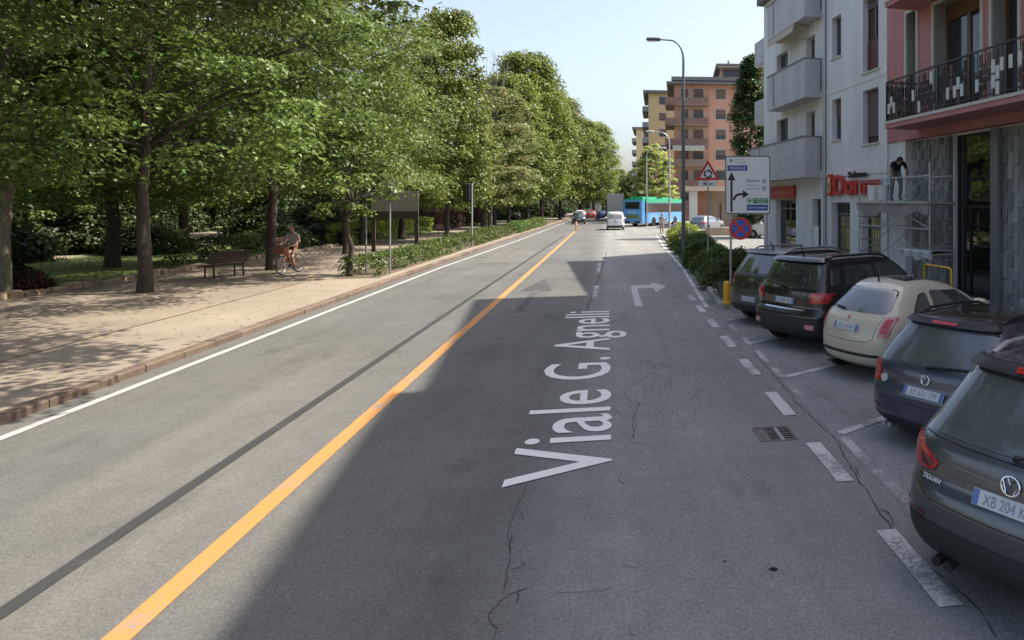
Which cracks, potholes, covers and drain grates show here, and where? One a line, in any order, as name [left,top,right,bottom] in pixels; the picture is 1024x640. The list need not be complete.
crack [474,321,734,453]
crack [488,485,528,640]
drain grate [752,426,798,442]
